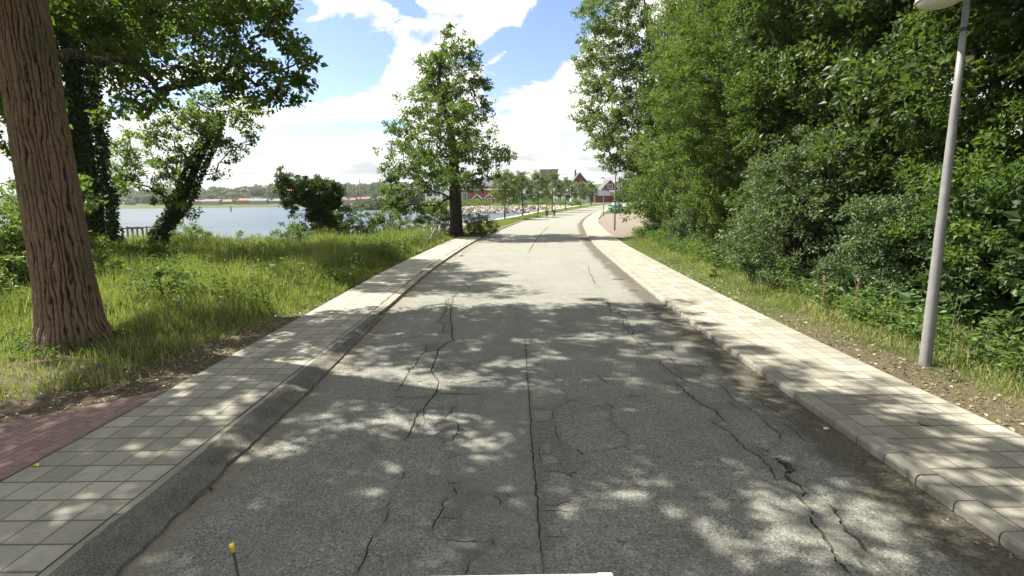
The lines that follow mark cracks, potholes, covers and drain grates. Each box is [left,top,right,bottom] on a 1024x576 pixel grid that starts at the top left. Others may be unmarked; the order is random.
crack [370,285,494,545]
crack [358,472,405,572]
crack [607,303,873,576]
